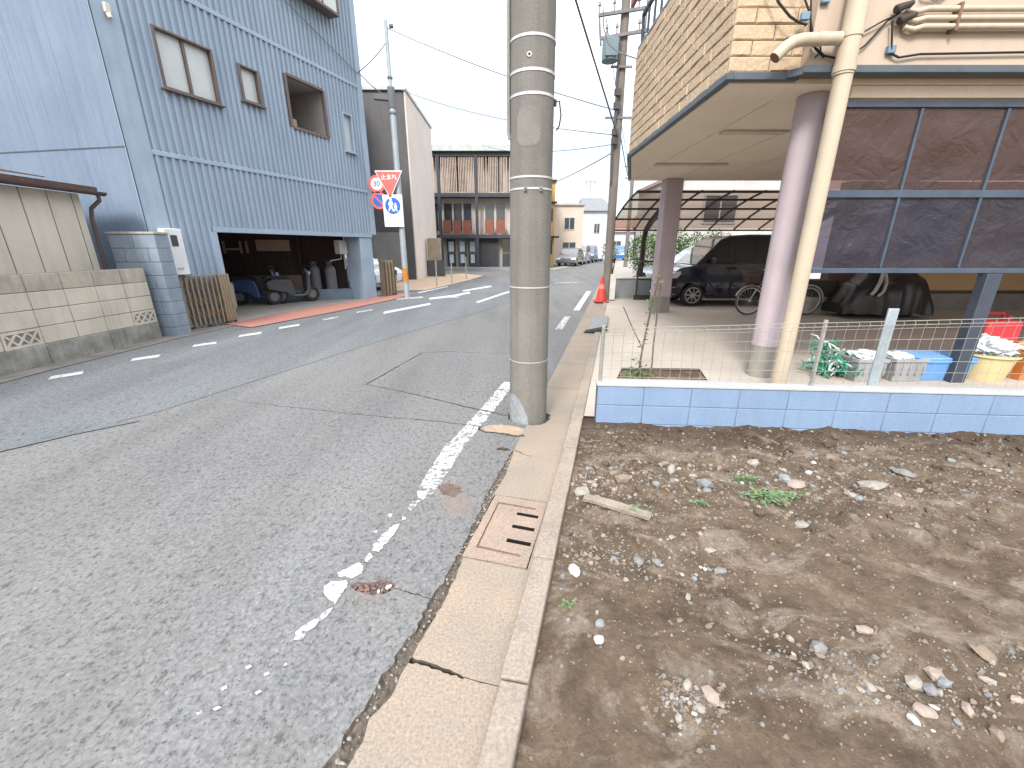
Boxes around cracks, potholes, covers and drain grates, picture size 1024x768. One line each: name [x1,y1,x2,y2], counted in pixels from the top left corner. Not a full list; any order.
pothole [349,580,396,595]
